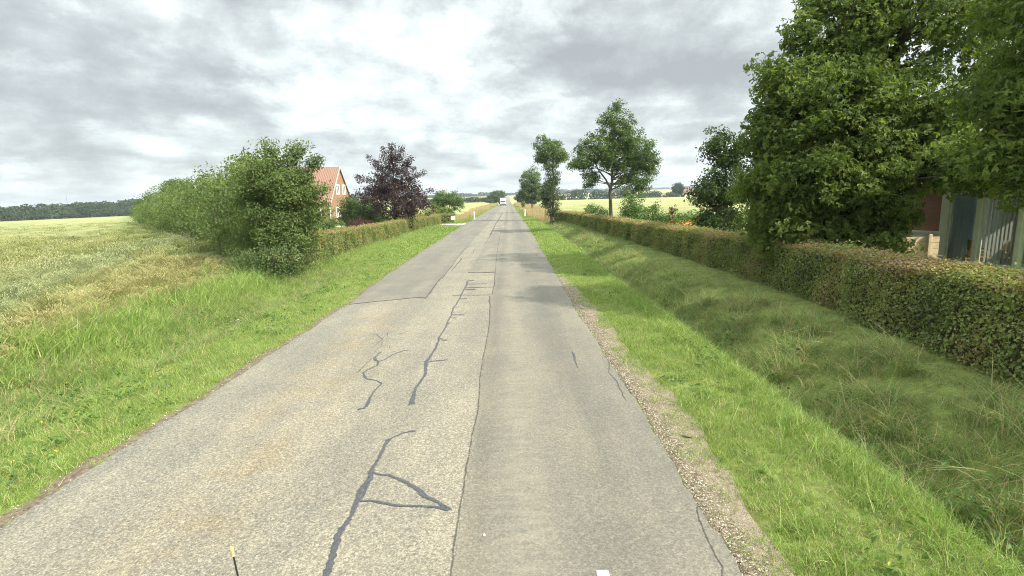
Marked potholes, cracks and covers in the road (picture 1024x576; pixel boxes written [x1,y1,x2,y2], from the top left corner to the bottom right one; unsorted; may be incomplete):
crack [697,501,723,576]
